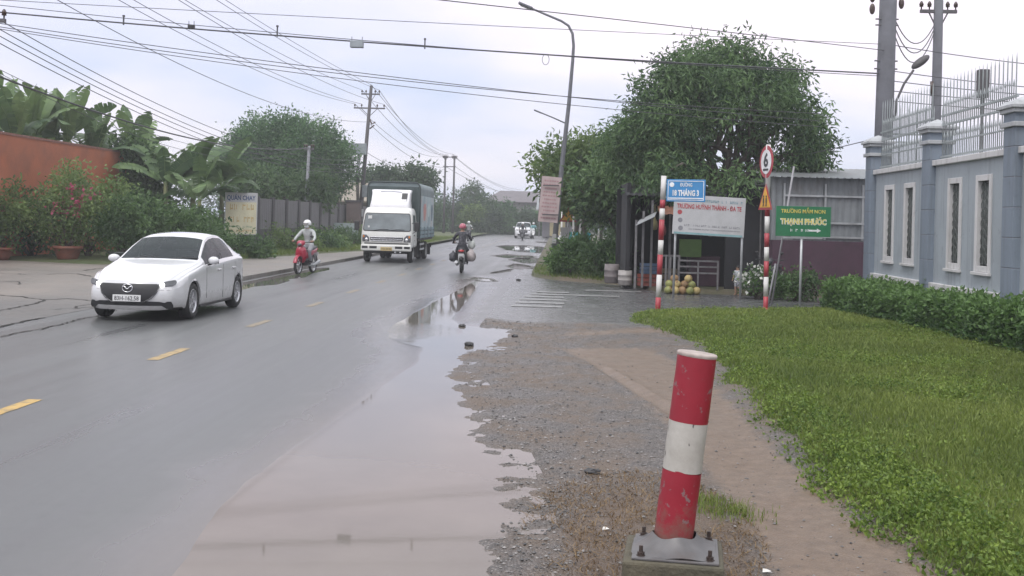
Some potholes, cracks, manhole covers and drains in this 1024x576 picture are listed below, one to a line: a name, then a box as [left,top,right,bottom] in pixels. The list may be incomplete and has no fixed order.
crack [0,273,91,327]
pothole [496,245,544,253]
